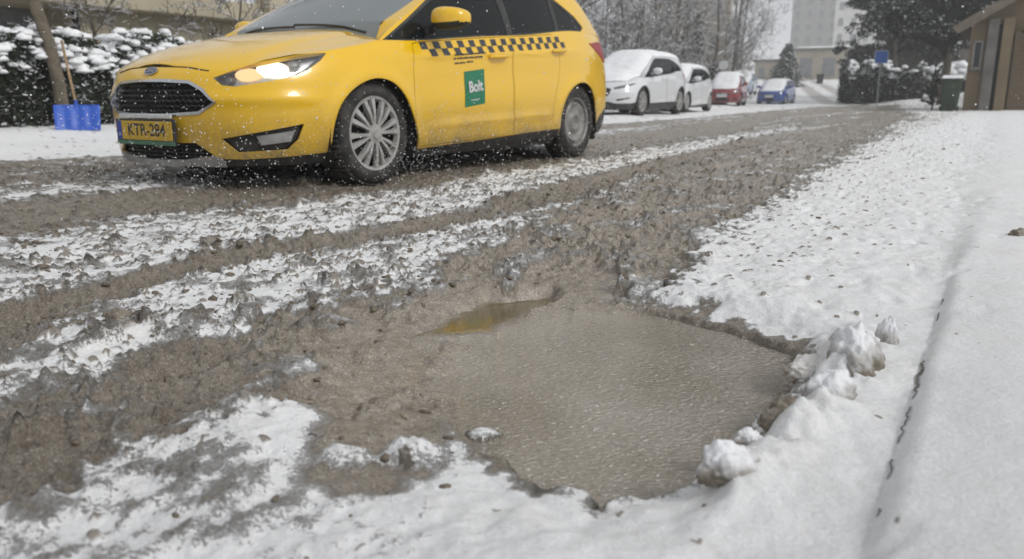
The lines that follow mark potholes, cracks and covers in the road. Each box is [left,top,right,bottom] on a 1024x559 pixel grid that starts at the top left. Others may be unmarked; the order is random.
pothole [400,272,826,523]
